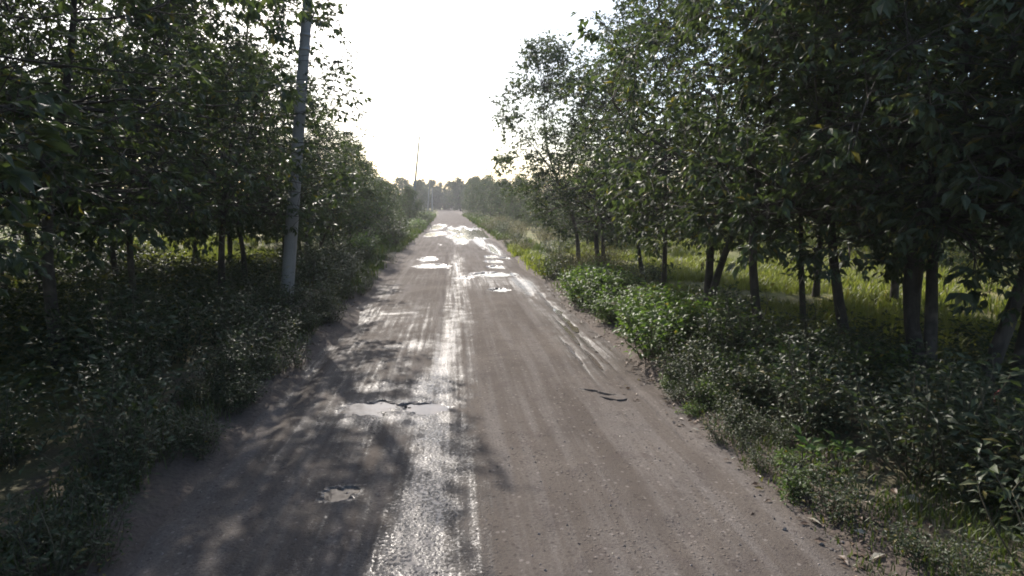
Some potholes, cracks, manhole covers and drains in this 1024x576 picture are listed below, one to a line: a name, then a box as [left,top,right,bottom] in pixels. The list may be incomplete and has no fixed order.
pothole [308,482,365,506]
pothole [326,397,407,422]
pothole [393,400,458,417]
